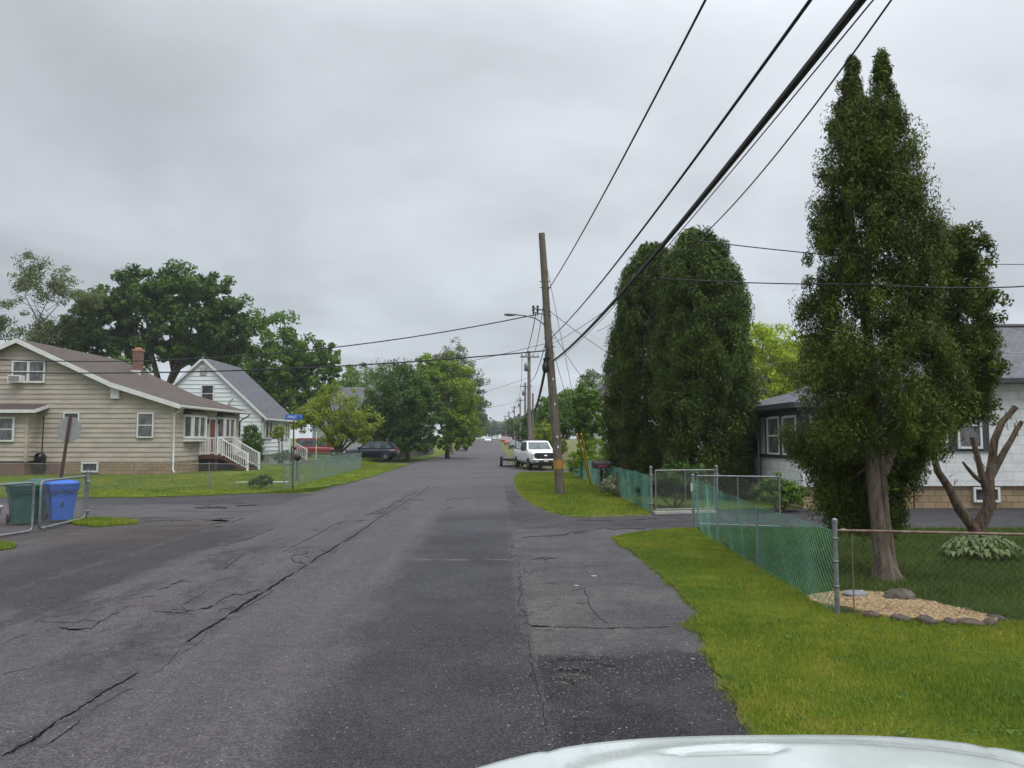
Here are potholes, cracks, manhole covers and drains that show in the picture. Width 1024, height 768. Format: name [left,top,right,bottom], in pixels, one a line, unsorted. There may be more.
crack [0,487,471,674]
crack [514,557,607,626]
crack [0,672,140,761]
pothole [550,669,593,688]
